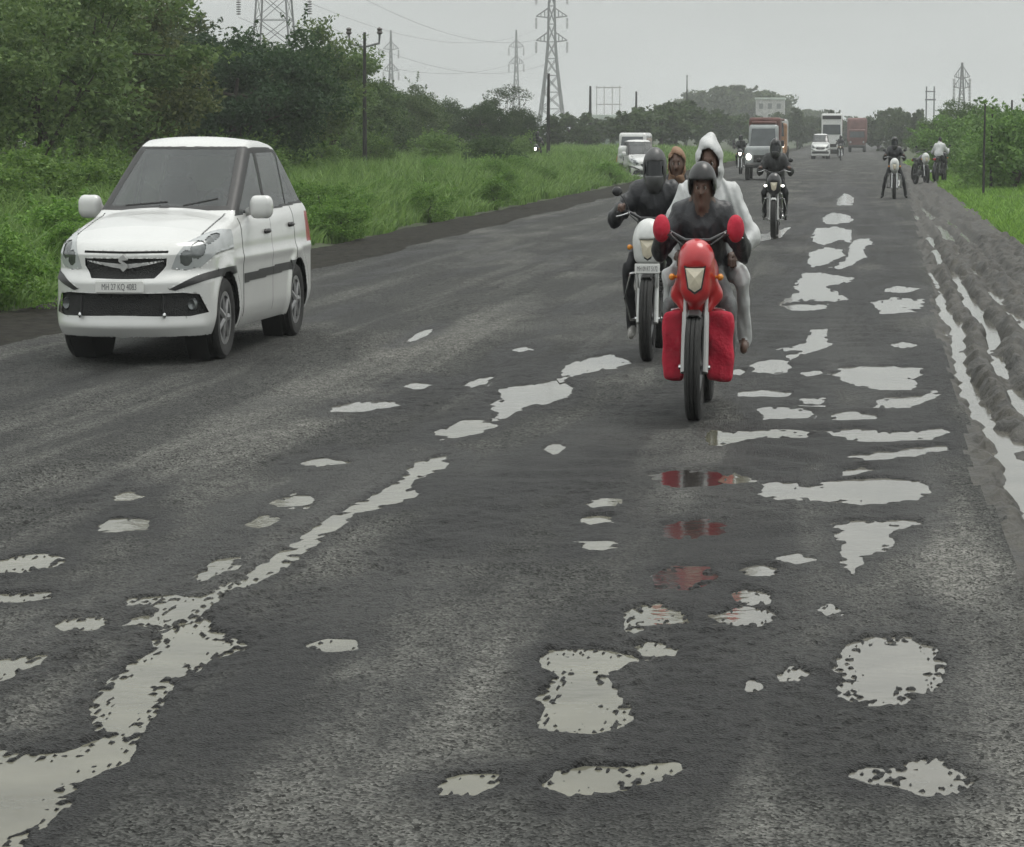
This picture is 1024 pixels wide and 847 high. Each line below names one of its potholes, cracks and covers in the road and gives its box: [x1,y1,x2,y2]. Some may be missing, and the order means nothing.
pothole [0,591,55,603]
pothole [846,755,979,797]
pothole [807,246,849,267]
pothole [534,647,648,734]
pothole [435,771,502,796]
pothole [621,602,692,634]
pothole [487,379,576,421]
pothole [810,226,853,245]
pothole [829,635,947,706]
pothole [306,639,359,652]
pothole [831,517,927,576]
pothole [829,238,874,269]
